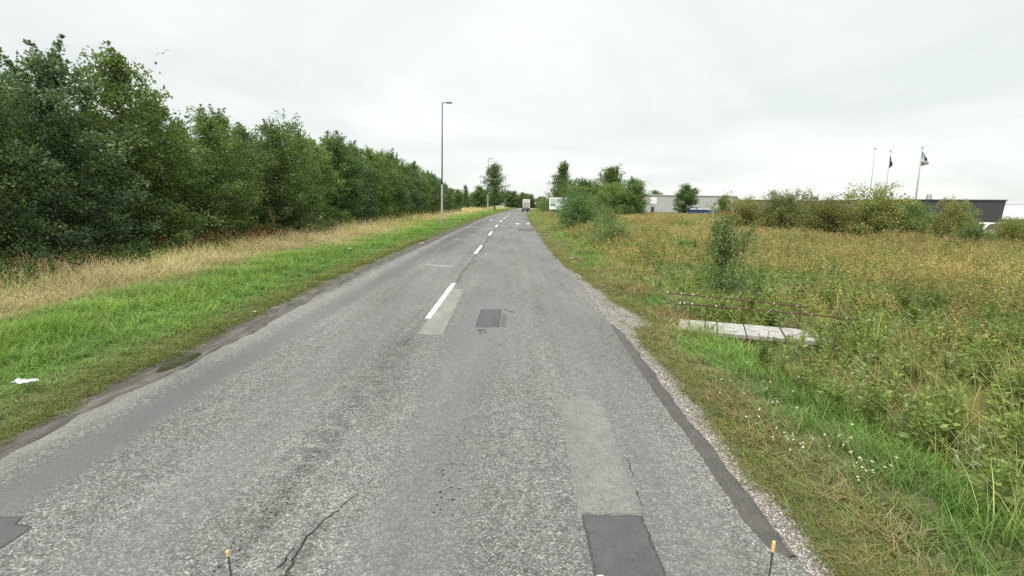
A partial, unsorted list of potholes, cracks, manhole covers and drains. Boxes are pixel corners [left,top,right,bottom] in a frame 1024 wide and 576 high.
crack [206,448,374,576]
